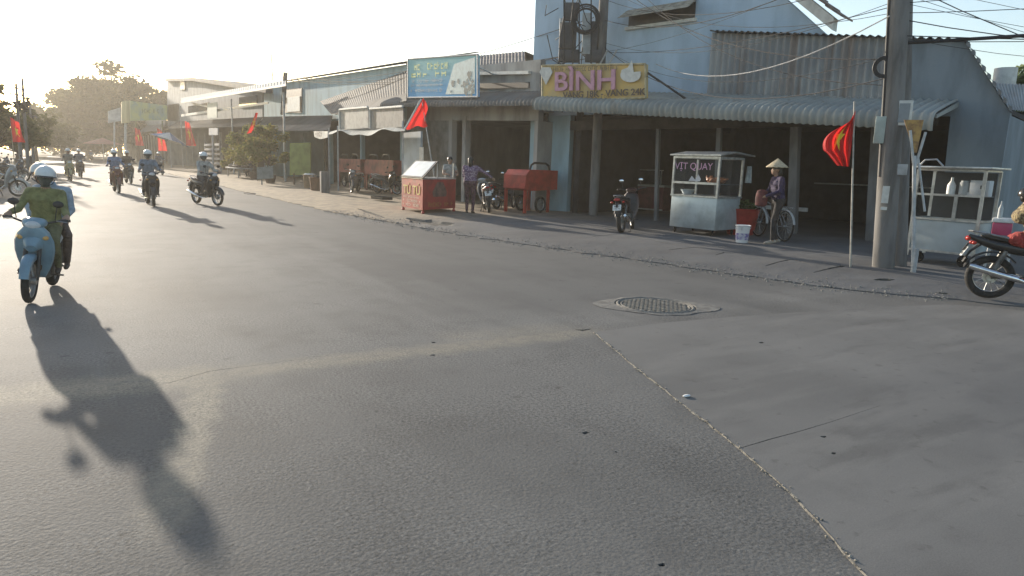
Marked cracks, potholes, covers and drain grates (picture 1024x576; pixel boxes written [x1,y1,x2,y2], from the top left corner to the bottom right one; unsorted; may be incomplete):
manhole cover [593,297,720,316]
